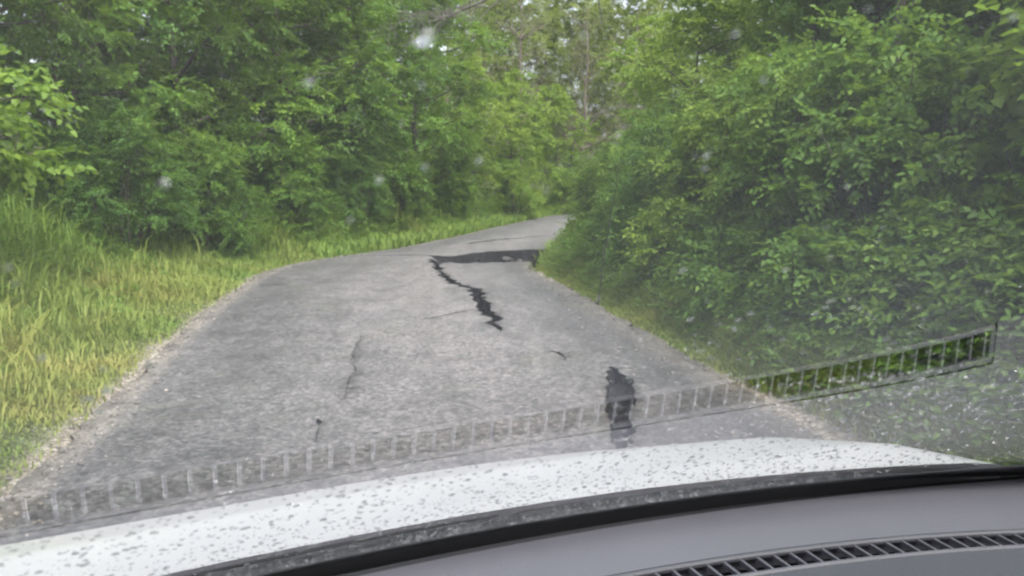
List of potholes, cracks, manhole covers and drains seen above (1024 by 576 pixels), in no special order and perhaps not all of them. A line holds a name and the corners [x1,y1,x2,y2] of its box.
pothole [604,366,634,426]
crack [424,237,541,331]
crack [343,335,361,399]
